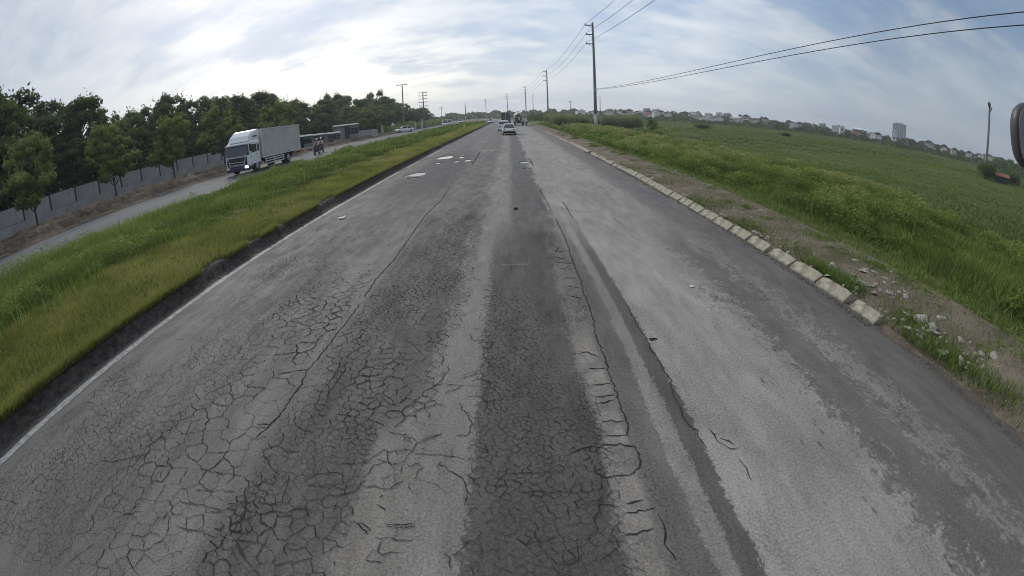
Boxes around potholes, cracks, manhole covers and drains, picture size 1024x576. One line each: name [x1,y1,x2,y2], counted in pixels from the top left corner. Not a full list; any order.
crack [626,304,751,479]
crack [463,189,676,576]
crack [0,190,499,576]
